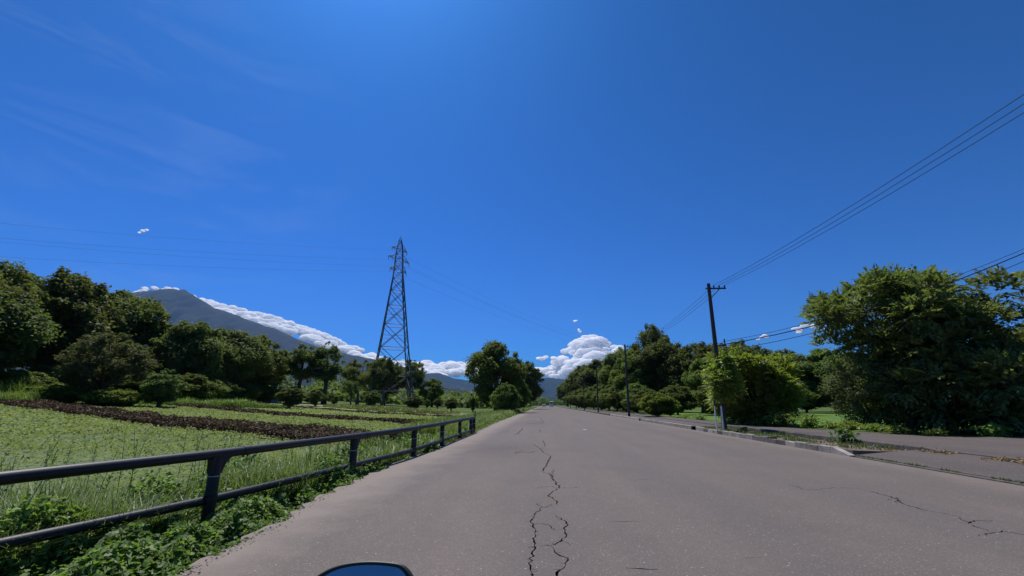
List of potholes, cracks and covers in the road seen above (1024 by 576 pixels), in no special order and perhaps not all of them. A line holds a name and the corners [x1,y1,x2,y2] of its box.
crack [516,418,580,576]
crack [864,490,1024,536]
